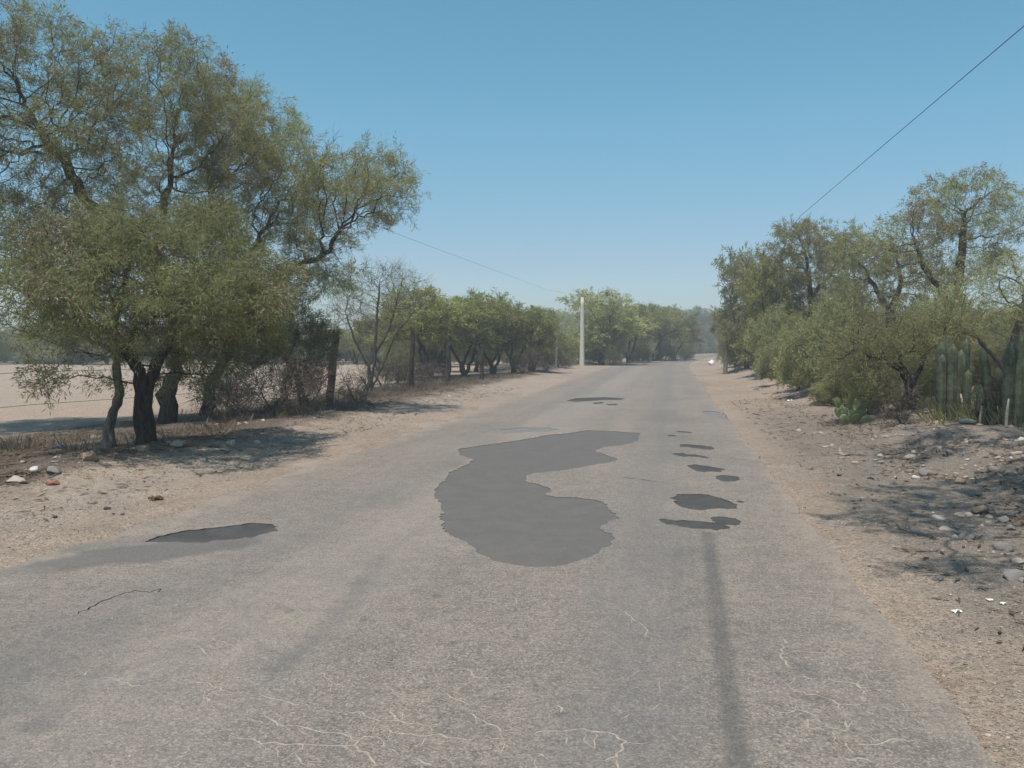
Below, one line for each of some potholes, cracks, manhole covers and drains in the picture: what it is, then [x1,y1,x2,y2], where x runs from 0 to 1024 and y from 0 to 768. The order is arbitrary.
crack [75,569,675,768]
crack [773,637,921,764]
